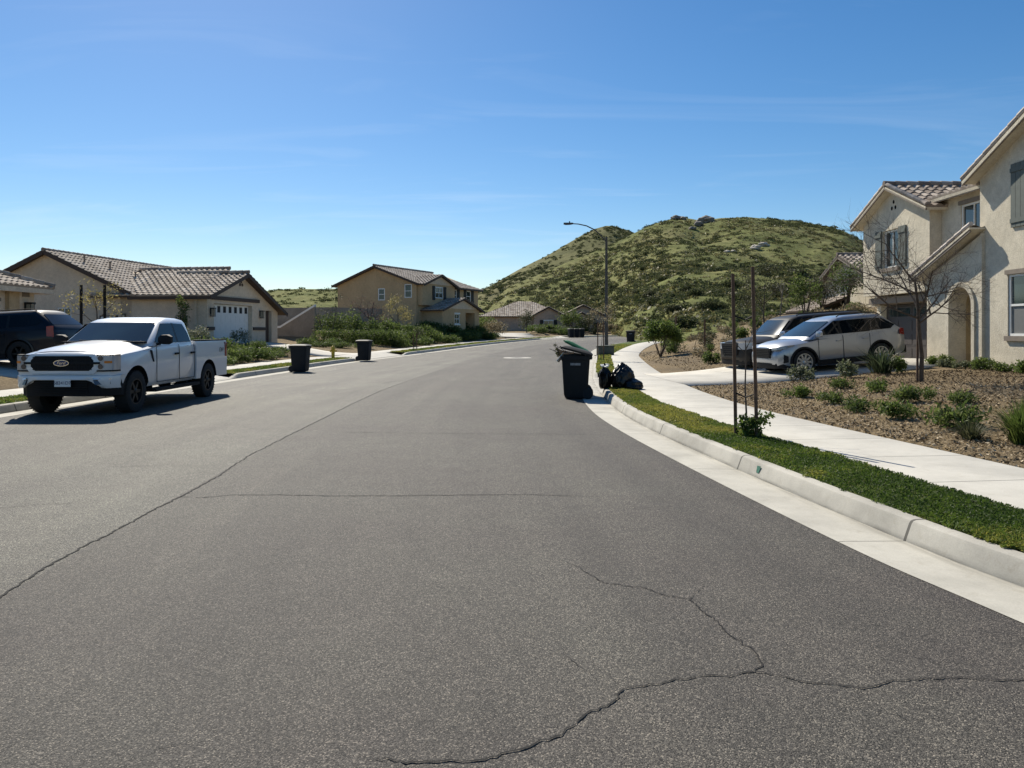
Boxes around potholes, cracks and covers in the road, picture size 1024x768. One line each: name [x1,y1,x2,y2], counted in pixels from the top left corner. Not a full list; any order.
crack [0,374,598,598]
crack [368,559,1024,764]
